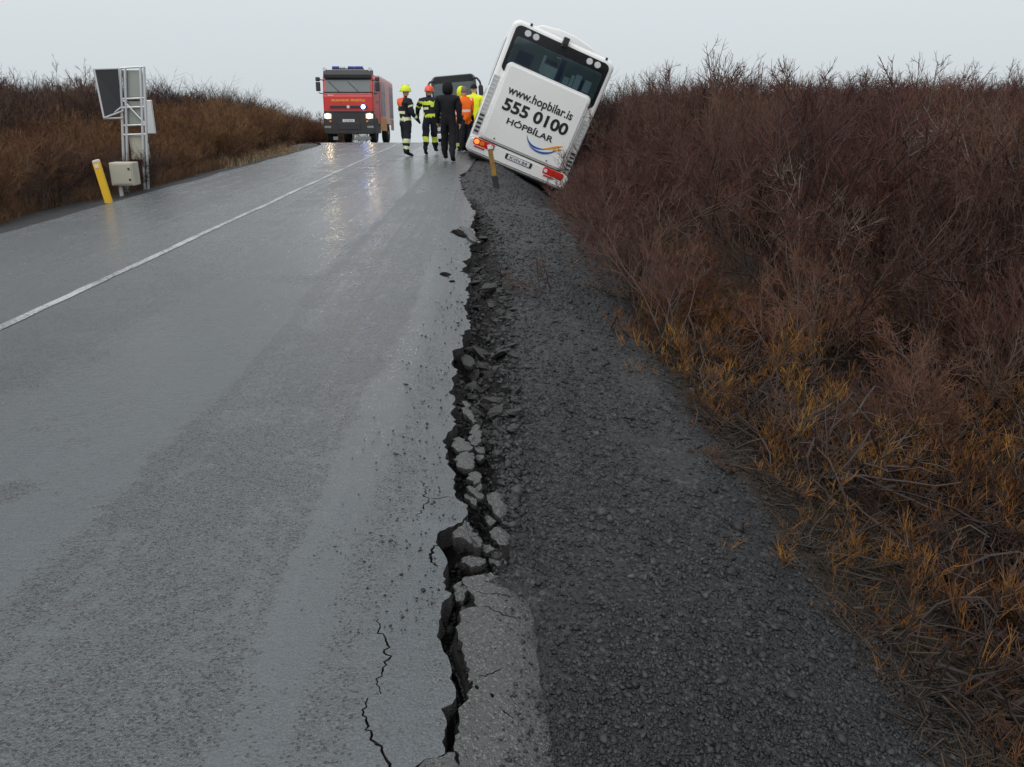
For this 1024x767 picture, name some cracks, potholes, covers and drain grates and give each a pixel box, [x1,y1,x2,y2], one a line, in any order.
crack [361,619,392,767]
crack [417,206,515,765]
